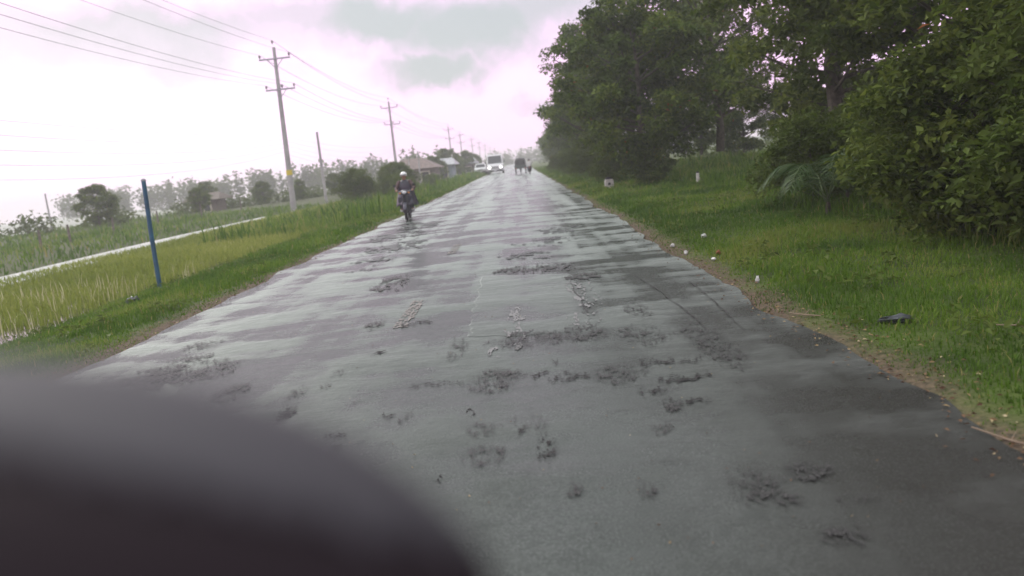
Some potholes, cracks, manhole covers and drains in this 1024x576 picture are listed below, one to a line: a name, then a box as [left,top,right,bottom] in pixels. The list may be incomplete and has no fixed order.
crack [635,275,745,330]
